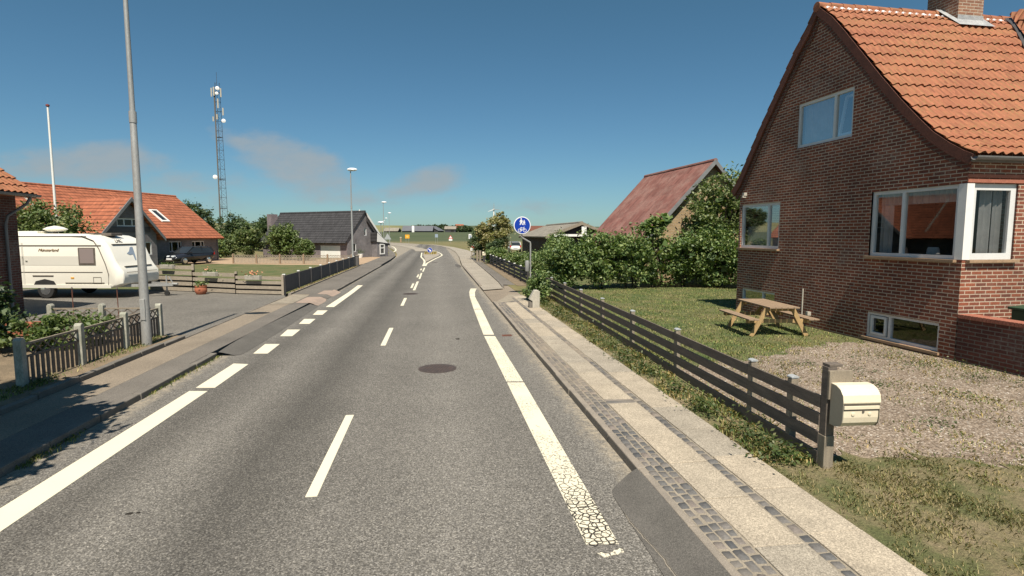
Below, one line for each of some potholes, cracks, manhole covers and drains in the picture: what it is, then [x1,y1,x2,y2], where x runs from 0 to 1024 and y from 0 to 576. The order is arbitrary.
crack [536,425,677,576]
manhole cover [418,364,456,373]
